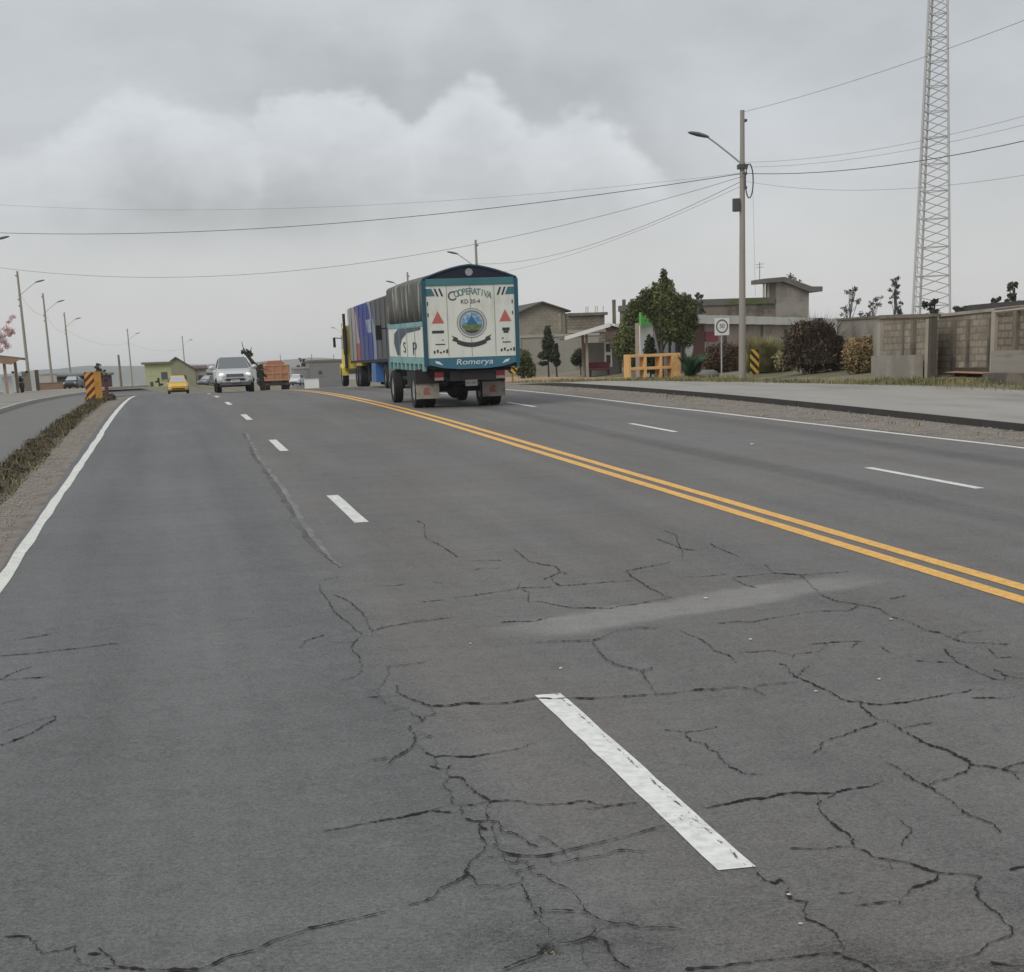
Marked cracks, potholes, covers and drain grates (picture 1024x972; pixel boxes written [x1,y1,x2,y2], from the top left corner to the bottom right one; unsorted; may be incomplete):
crack [0,715,56,745]
crack [319,577,448,680]
crack [4,743,677,971]
crack [369,626,1024,832]
crack [685,780,1023,972]
crack [0,633,116,680]
crack [658,531,1014,680]
crack [453,550,671,622]
